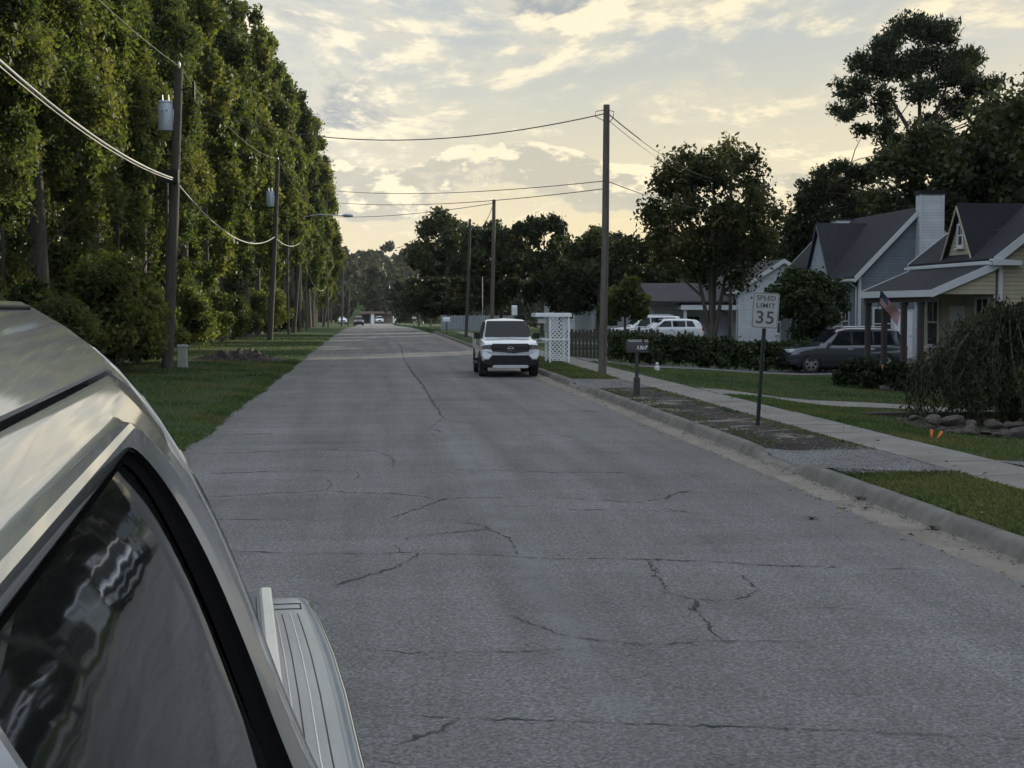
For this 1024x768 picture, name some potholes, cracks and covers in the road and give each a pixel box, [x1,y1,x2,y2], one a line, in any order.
crack [210,470,735,517]
crack [234,521,935,645]
crack [378,715,1023,751]
crack [396,341,476,436]
